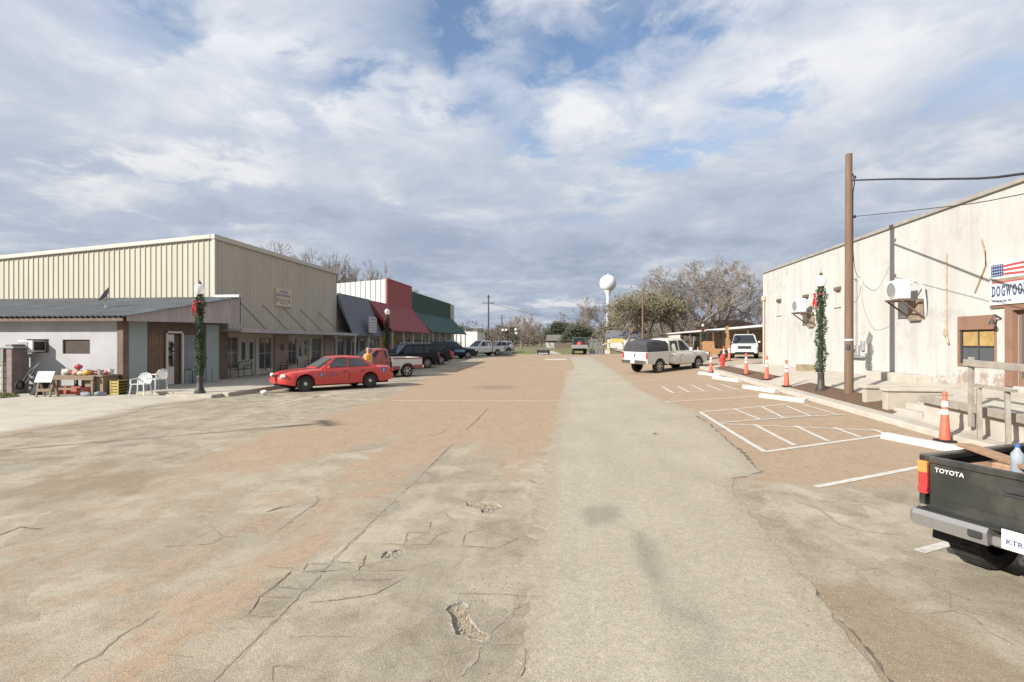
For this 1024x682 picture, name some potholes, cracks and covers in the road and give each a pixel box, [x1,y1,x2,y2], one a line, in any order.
pothole [464,501,504,513]
pothole [443,601,493,643]
crack [267,496,319,530]
crack [388,511,517,548]
crack [62,613,156,679]
crack [795,500,910,536]
crack [0,526,40,535]
pothole [379,549,403,561]
crack [228,555,406,616]
crack [166,527,239,547]
crack [269,663,301,680]
crack [455,592,535,677]
